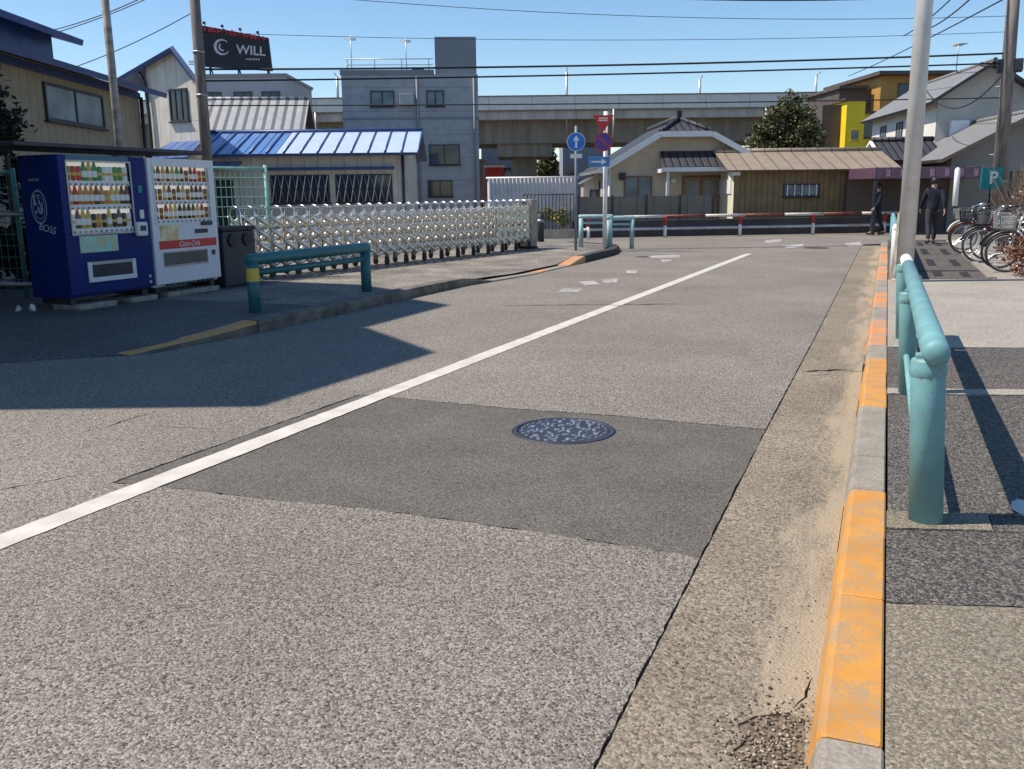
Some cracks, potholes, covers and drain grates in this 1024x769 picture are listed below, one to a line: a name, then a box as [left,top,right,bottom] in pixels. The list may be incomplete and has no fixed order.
manhole cover [513,418,615,444]
pothole [707,664,814,769]
